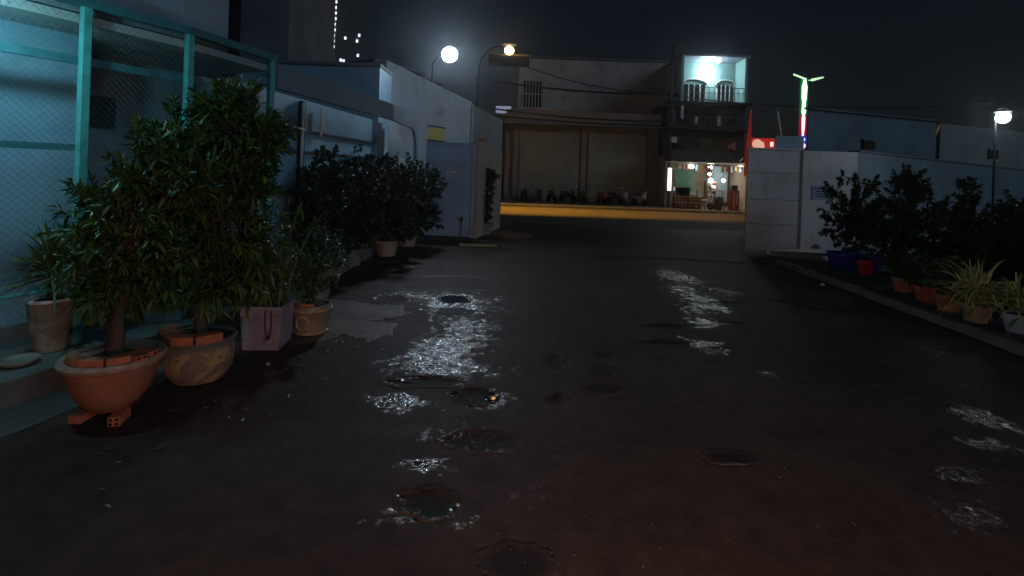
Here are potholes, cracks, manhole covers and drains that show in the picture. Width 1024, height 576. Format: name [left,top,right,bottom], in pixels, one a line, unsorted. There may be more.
pothole [545,393,573,405]
pothole [433,427,529,455]
pothole [591,367,617,377]
pothole [699,449,764,467]
pothole [579,383,628,396]
pothole [392,485,467,523]
pothole [376,374,477,390]
pothole [438,294,472,305]
pothole [473,540,563,576]
pothole [445,386,501,408]
pothole [542,354,574,371]
